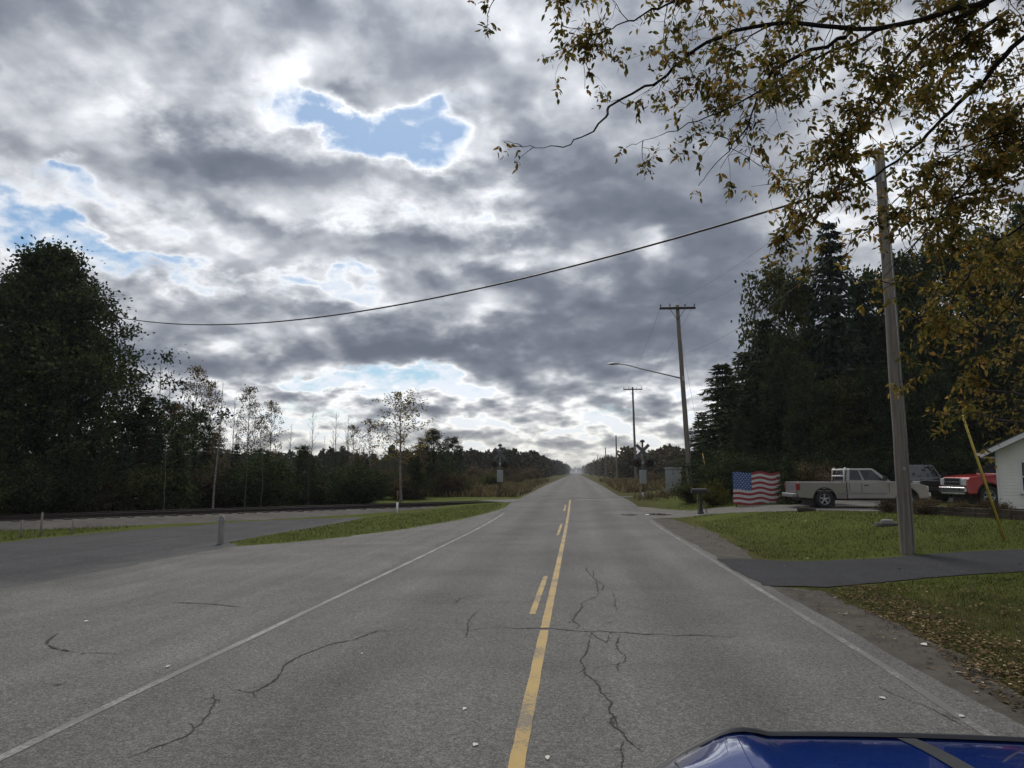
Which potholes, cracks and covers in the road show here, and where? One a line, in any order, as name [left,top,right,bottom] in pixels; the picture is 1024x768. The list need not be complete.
crack [236,567,730,768]
crack [128,693,220,758]
crack [46,633,116,662]
